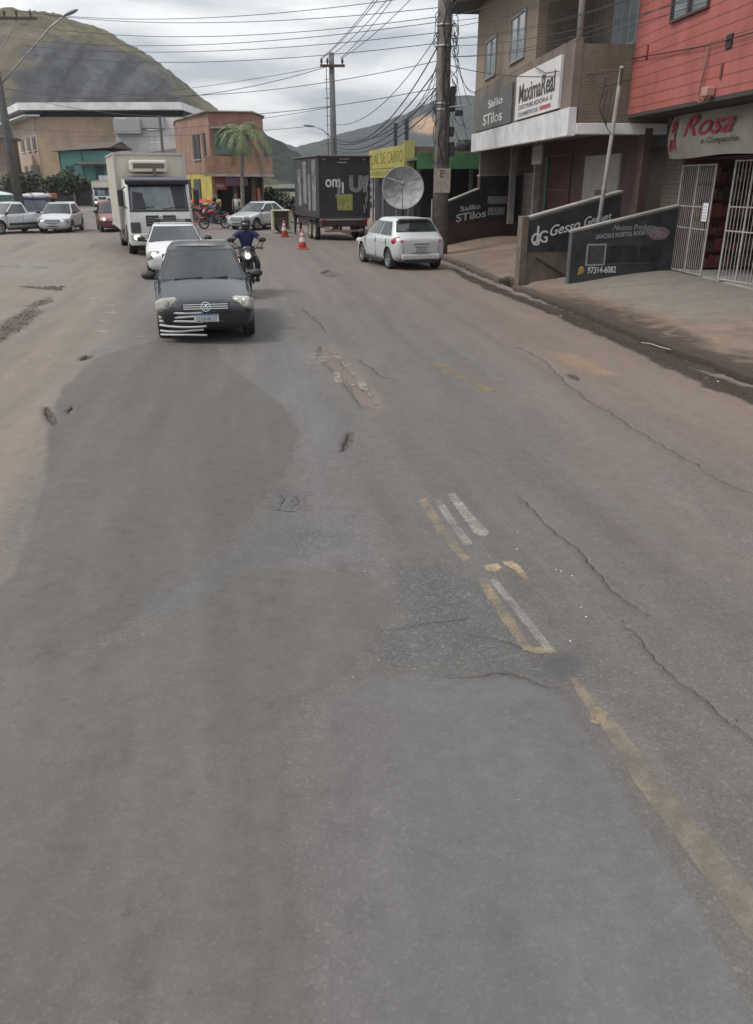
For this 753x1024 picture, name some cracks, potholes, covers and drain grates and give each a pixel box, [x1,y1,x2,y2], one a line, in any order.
pothole [37,405,64,428]
crack [375,494,753,749]
crack [354,358,398,381]
pothole [334,430,360,455]
crack [694,467,753,496]
crack [297,308,334,333]
pothole [73,354,100,362]
